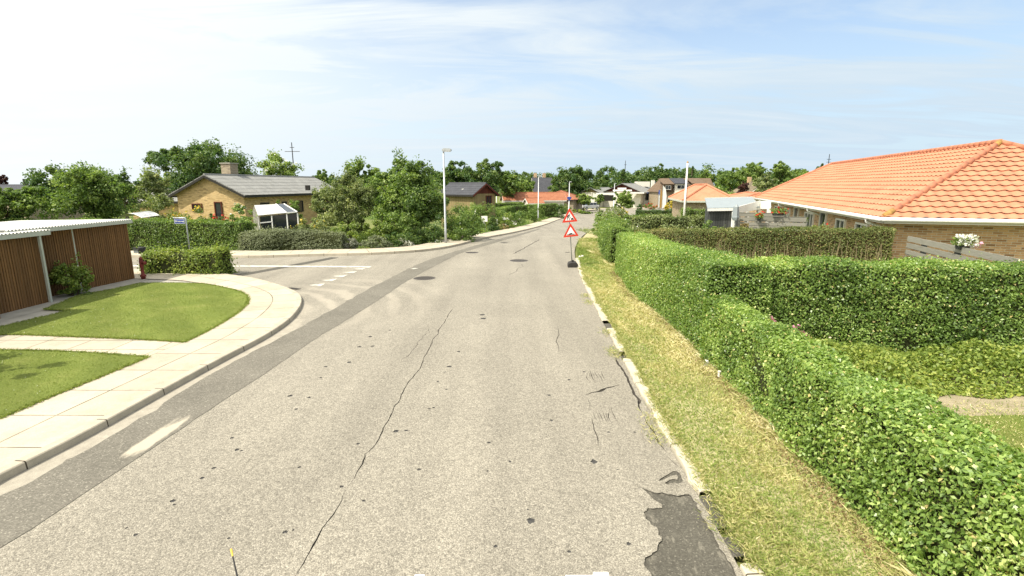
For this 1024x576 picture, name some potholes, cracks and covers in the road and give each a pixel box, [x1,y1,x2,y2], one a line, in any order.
crack [586,359,673,487]
crack [296,310,452,575]
